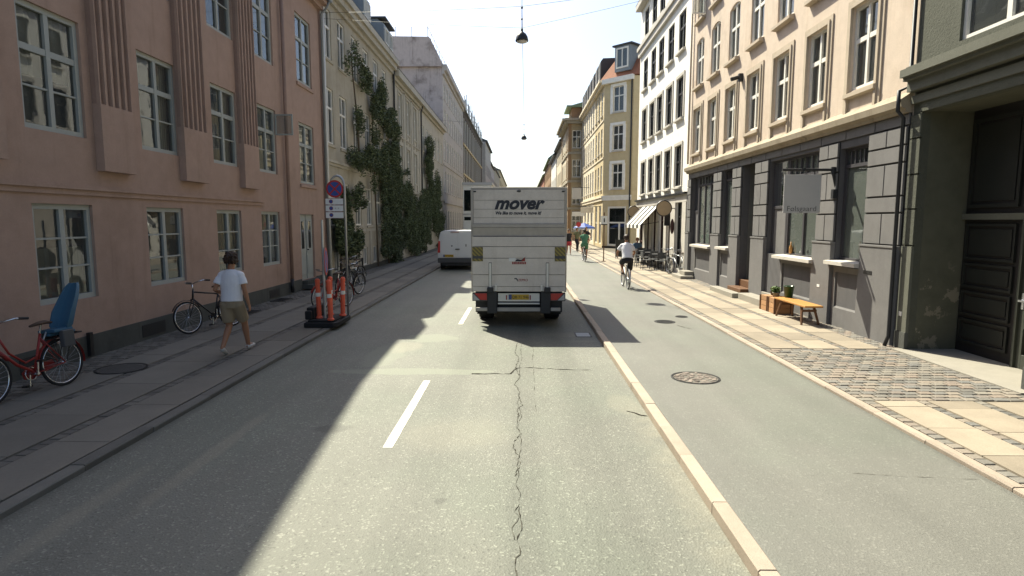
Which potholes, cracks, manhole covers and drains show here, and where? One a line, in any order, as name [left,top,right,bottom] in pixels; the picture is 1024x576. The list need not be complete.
manhole cover [671,372,721,384]
crack [472,345,571,576]
manhole cover [93,363,149,375]
